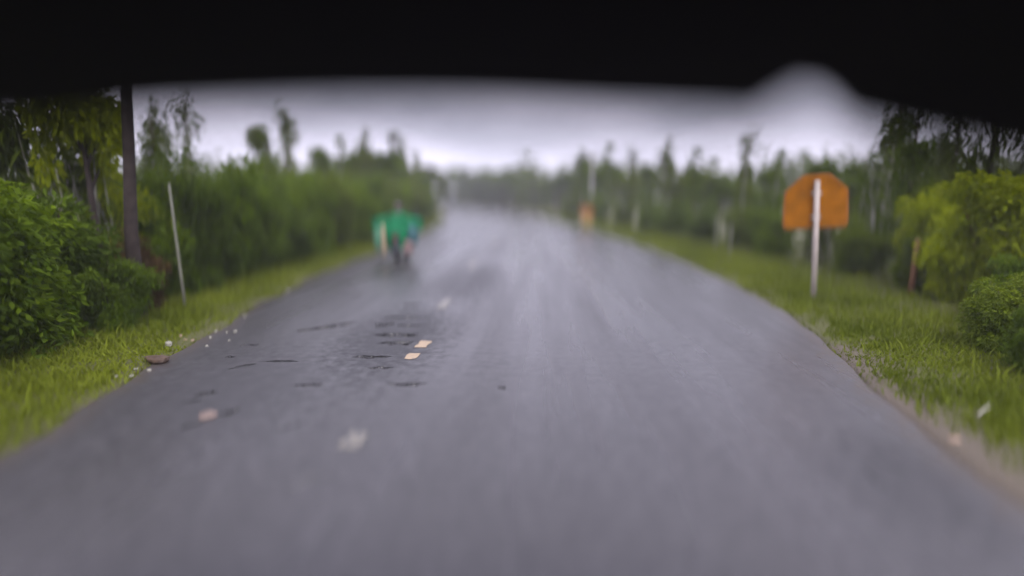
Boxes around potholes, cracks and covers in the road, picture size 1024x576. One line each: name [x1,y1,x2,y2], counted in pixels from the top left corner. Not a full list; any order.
pothole [292,321,357,332]
